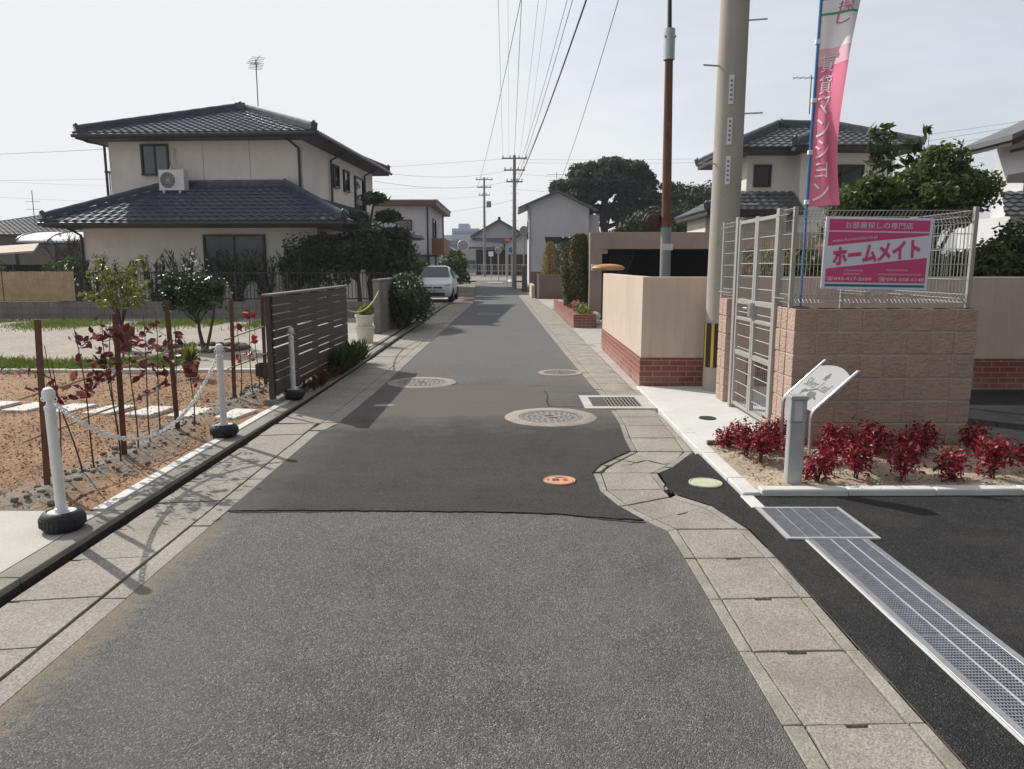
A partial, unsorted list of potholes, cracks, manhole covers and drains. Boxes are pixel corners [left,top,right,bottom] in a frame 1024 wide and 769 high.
manhole cover [505,408,597,427]
drain grate [579,395,657,412]
drain grate [755,507,881,540]
manhole cover [387,377,456,388]
